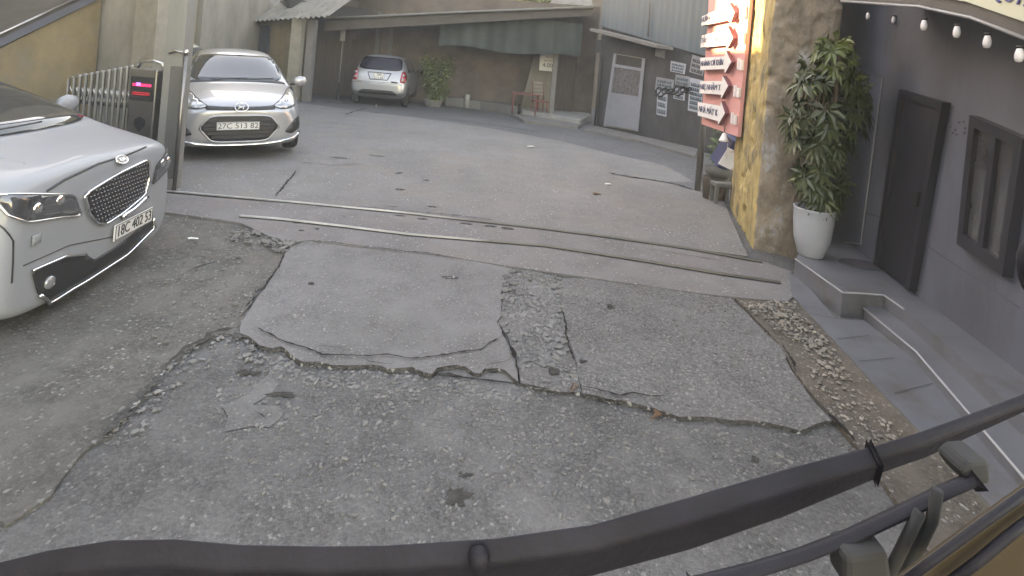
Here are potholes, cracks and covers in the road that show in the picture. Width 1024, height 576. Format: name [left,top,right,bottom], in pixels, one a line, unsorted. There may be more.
crack [581,385,664,397]
crack [781,343,796,372]
crack [258,308,575,389]
crack [245,255,284,308]
crack [97,327,238,443]
crack [276,162,362,196]
pothole [445,487,475,506]
